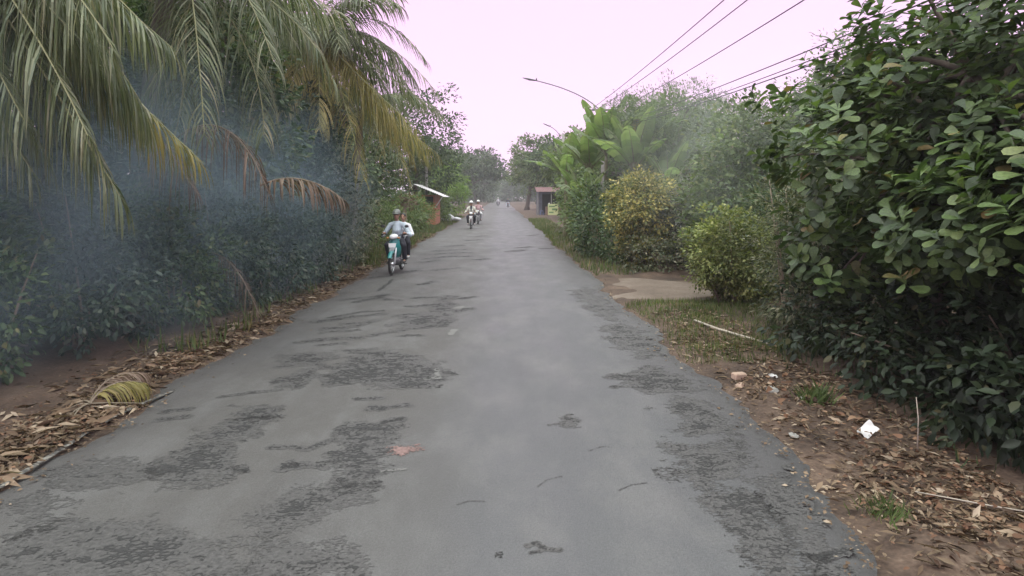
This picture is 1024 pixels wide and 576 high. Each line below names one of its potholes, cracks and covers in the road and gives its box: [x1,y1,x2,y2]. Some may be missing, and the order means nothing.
pothole [547,414,582,428]
